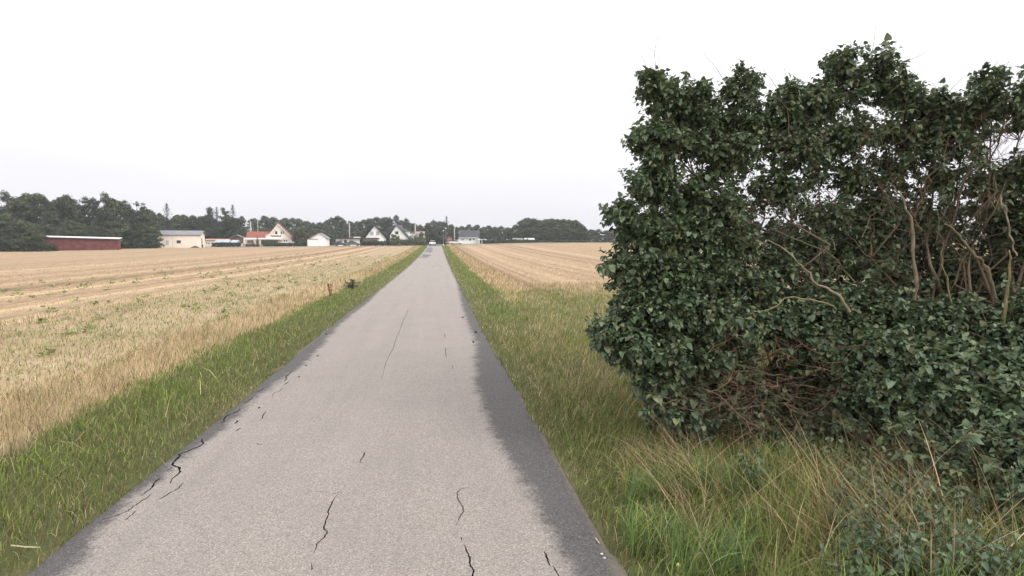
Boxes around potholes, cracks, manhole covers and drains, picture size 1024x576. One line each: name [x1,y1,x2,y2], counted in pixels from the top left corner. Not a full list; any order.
crack [311,491,340,570]
crack [103,360,310,520]
crack [456,487,475,576]
